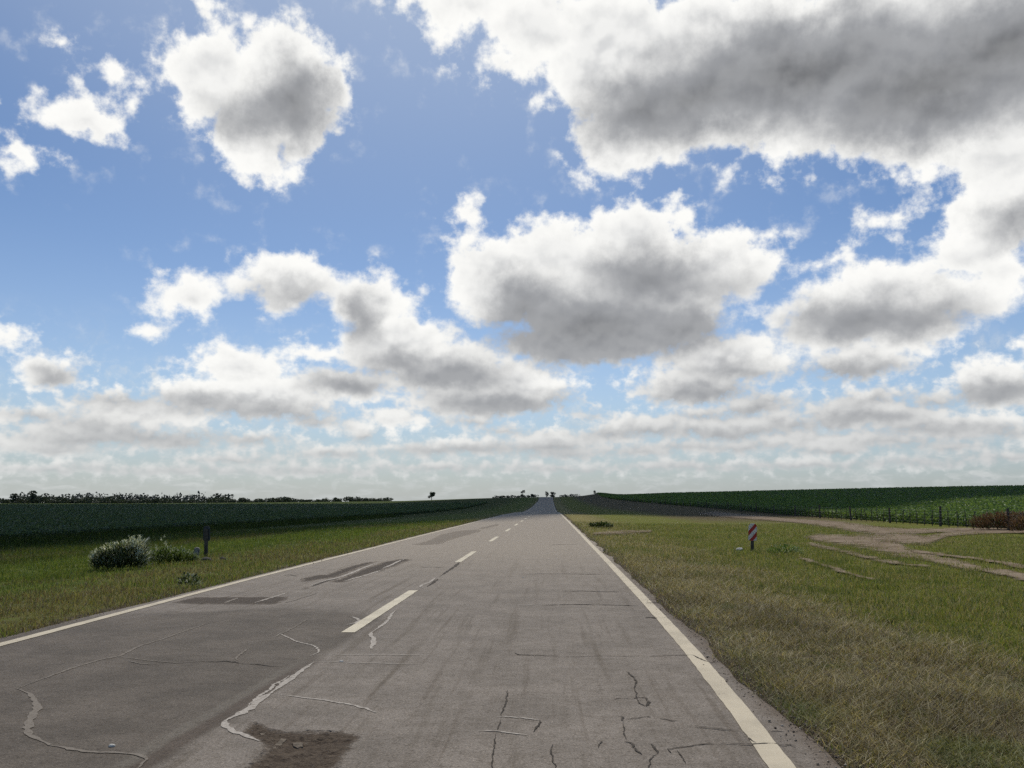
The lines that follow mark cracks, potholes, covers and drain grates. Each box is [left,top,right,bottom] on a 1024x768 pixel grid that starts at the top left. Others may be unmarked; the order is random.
crack [347,610,396,649]
crack [598,671,796,768]
crack [481,690,557,768]
